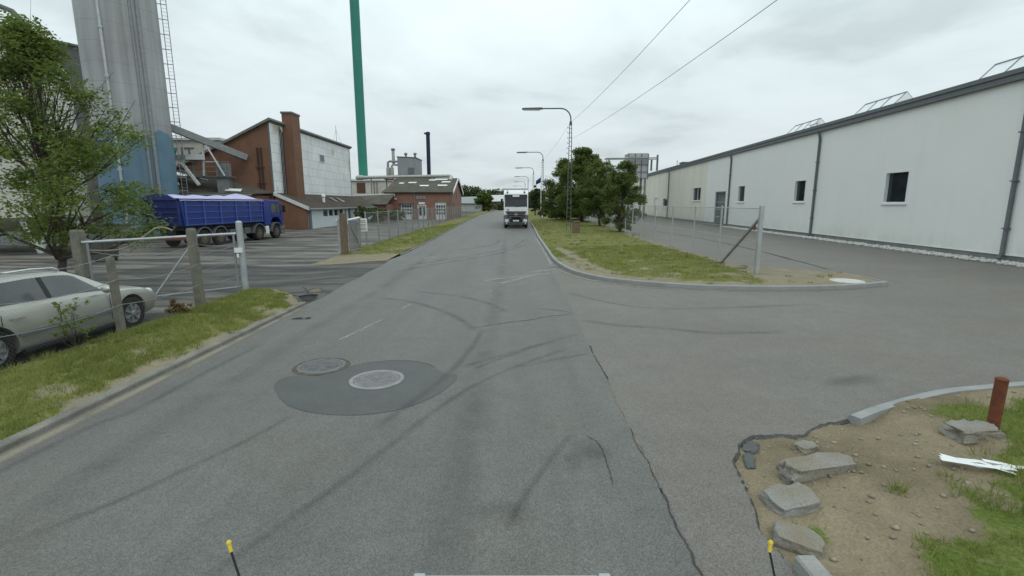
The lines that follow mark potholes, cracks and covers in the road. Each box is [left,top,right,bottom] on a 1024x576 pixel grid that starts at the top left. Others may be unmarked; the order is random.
crack [588,345,703,576]
manhole cover [292,358,350,376]
manhole cover [349,370,404,390]
